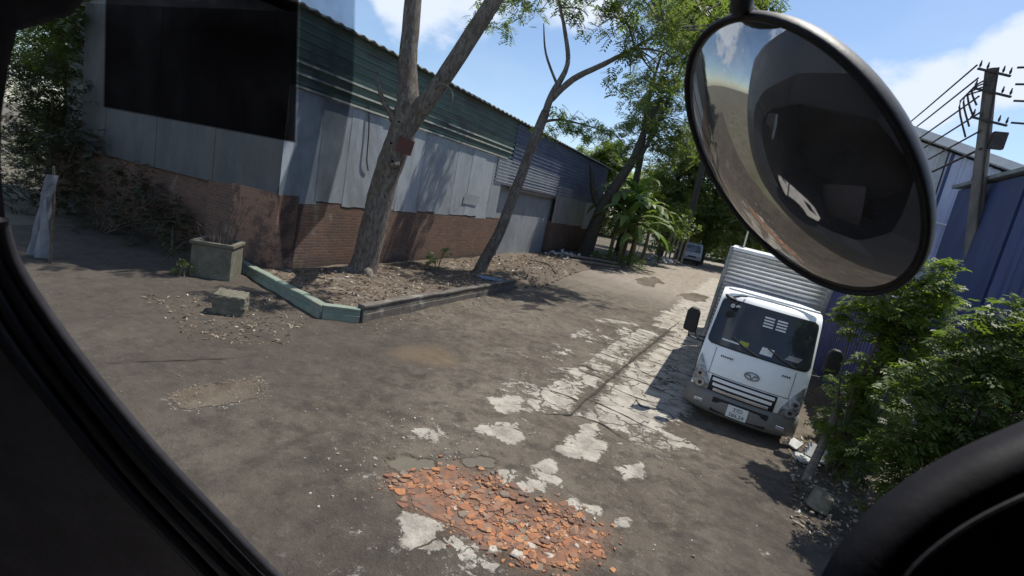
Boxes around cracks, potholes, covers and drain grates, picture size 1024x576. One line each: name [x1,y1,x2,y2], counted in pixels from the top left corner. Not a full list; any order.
pothole [167,376,266,409]
